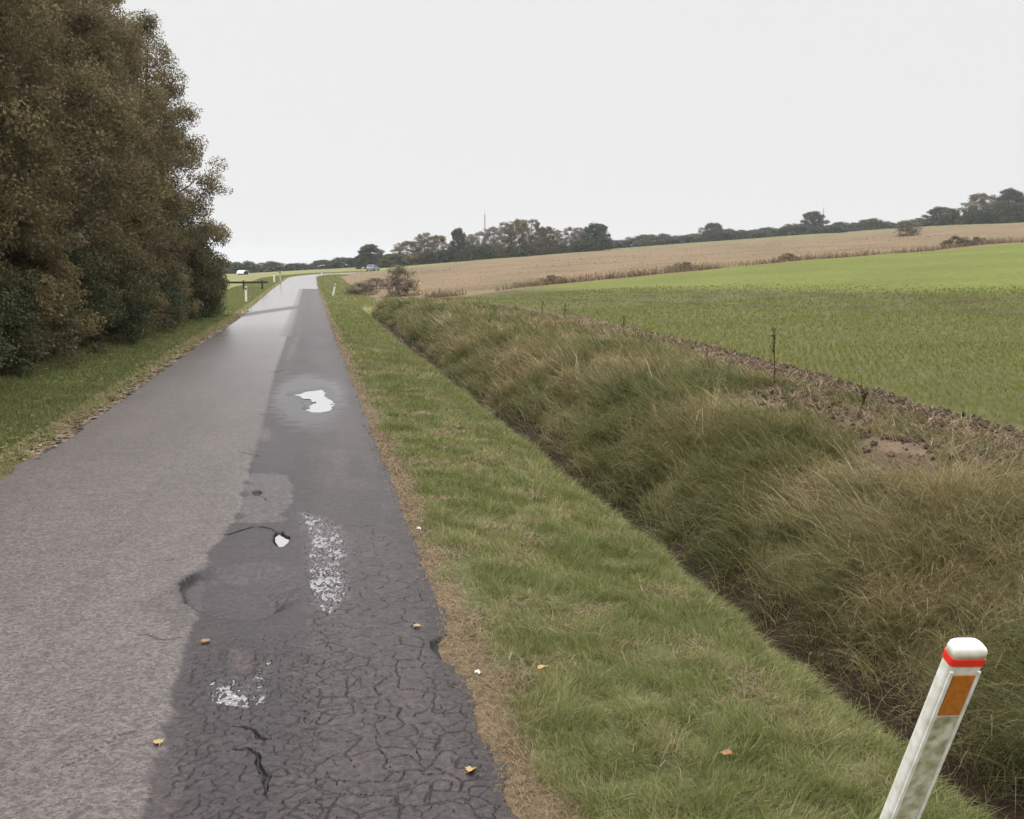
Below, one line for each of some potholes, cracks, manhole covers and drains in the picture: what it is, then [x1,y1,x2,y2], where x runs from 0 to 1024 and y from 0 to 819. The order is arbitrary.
crack [301,514,377,615]
crack [221,526,275,535]
pothole [178,561,324,621]
crack [157,530,500,819]
